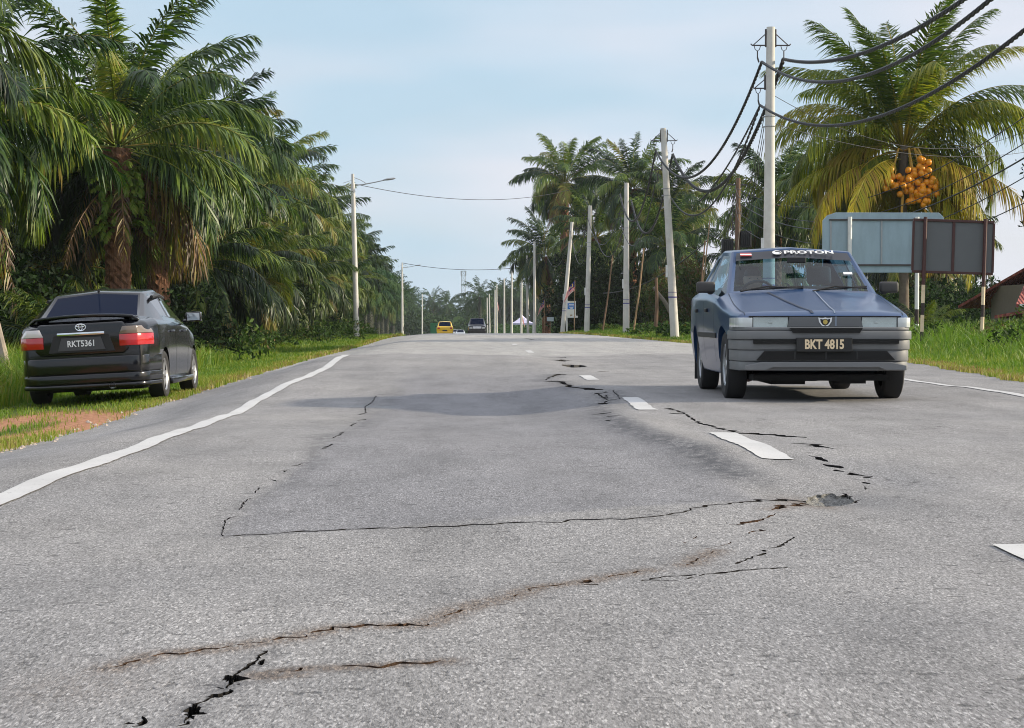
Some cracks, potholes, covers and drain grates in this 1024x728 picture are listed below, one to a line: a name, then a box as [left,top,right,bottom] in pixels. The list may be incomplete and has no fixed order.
pothole [804,493,859,507]
crack [665,408,873,490]
crack [545,357,620,421]
crack [115,502,806,726]
